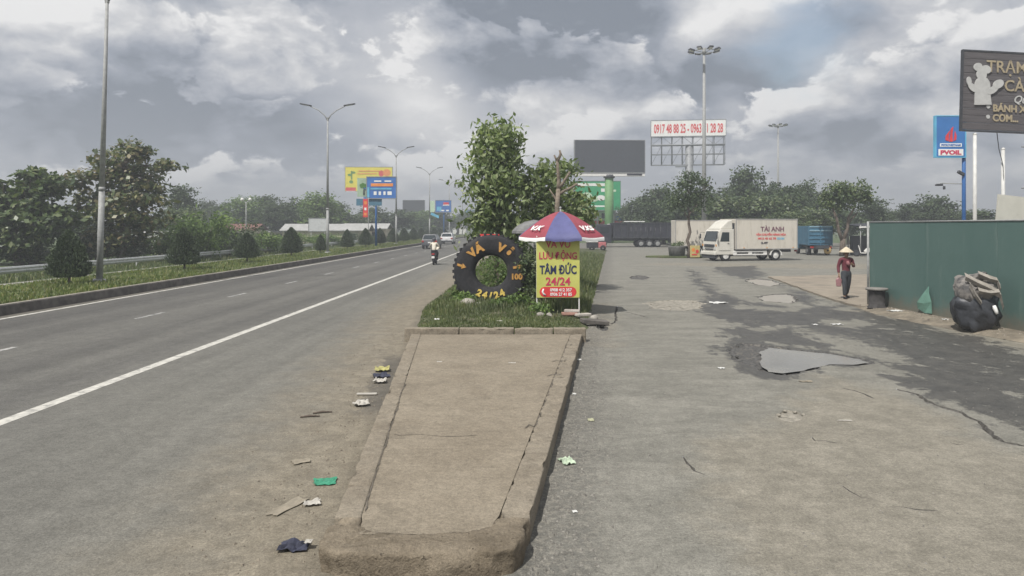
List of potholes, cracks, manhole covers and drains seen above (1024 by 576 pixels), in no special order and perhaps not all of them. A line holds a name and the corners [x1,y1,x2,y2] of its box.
crack [897,389,1024,446]
pothole [726,342,875,375]
pothole [745,278,783,286]
pothole [775,409,806,422]
pothole [756,294,799,303]
